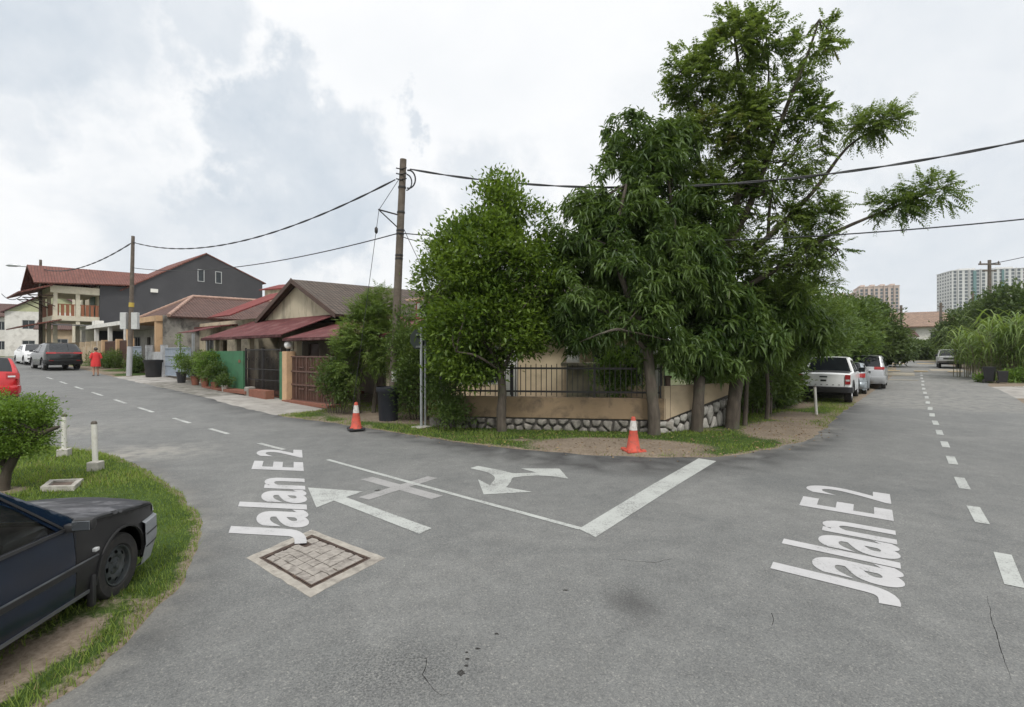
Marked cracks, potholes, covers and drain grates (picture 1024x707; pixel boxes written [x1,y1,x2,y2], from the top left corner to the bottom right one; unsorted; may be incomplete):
manhole cover [247,530,385,598]
